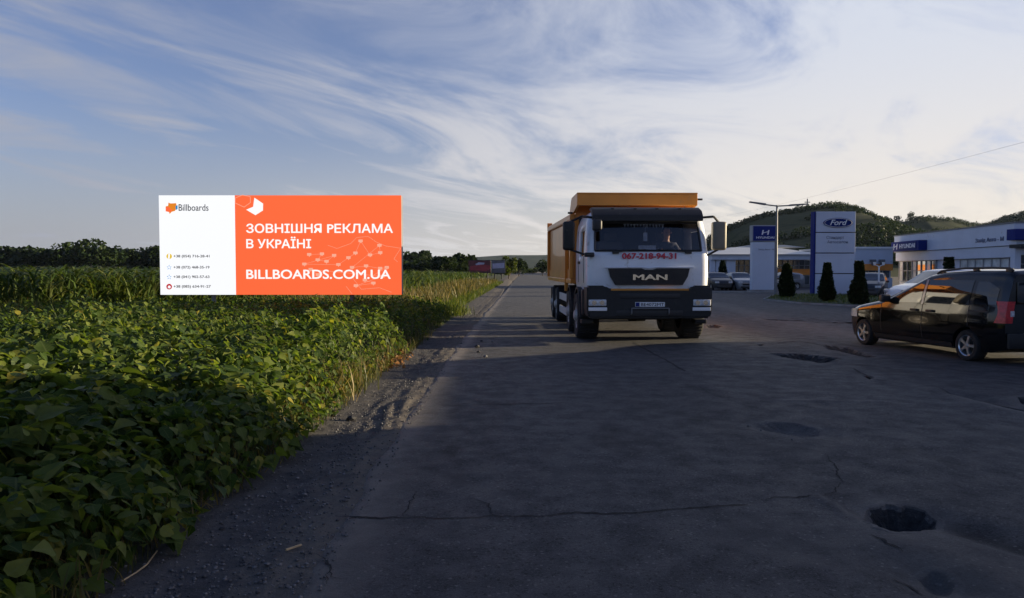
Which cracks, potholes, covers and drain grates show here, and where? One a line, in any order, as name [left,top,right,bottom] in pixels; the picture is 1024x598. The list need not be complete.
crack [343,493,747,519]
crack [767,452,843,499]
pothole [816,345,880,358]
pothole [755,420,826,438]
pothole [765,353,846,364]
pothole [855,502,946,535]
